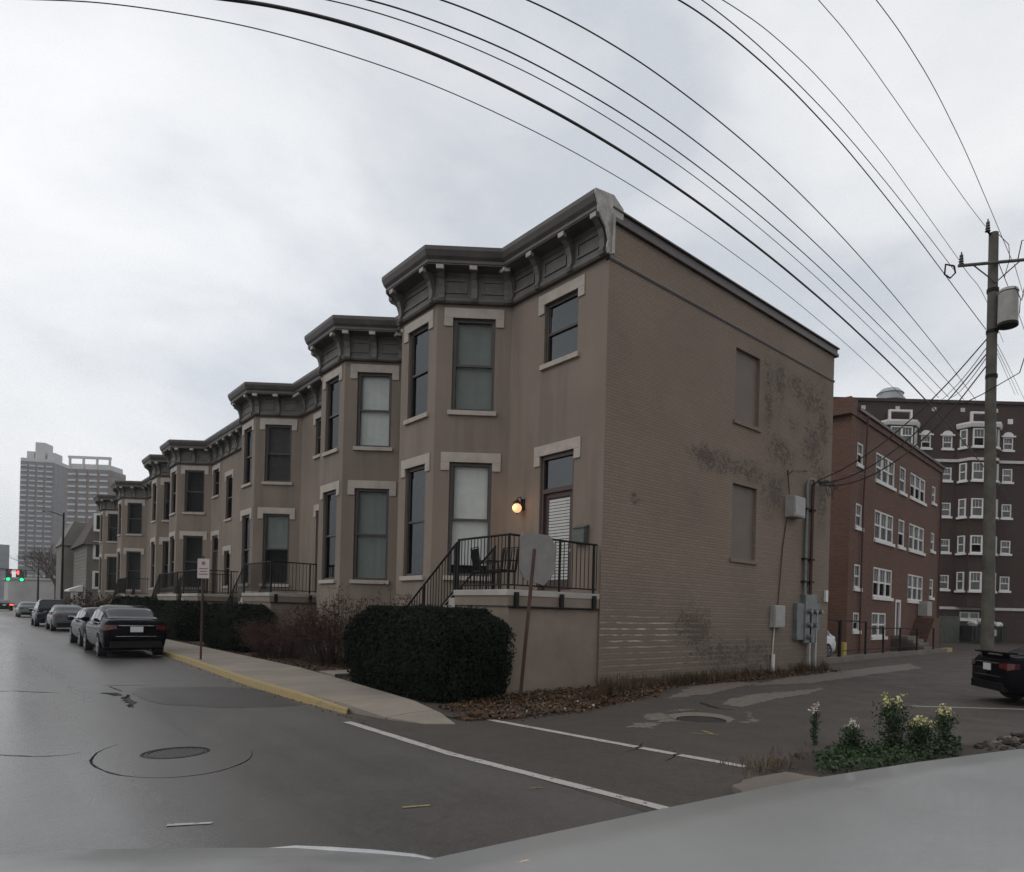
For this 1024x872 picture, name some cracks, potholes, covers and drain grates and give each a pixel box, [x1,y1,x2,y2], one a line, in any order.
crack [107,685,169,708]
manhole cover [140,747,210,759]
crack [699,702,732,710]
manhole cover [668,712,735,723]
